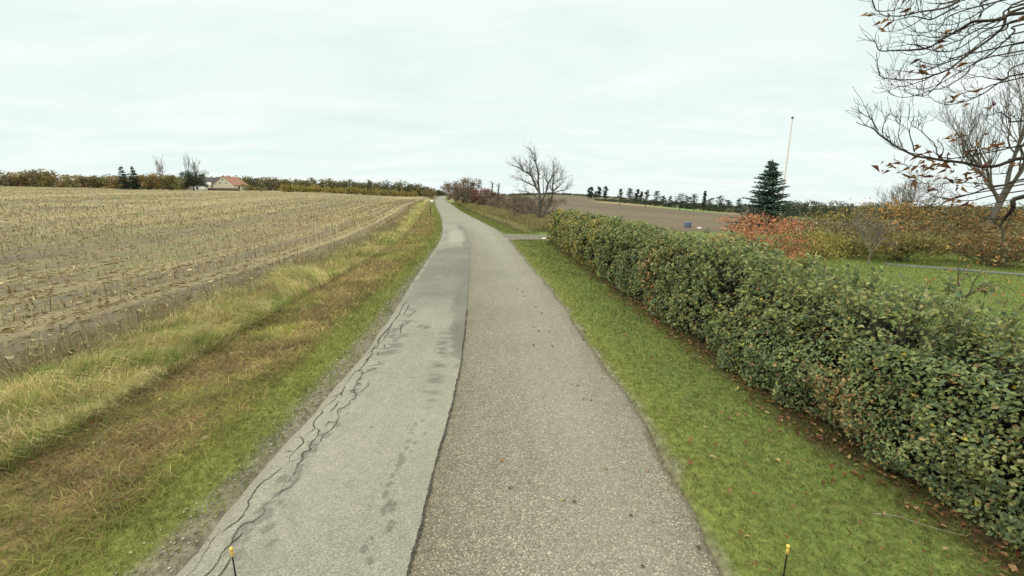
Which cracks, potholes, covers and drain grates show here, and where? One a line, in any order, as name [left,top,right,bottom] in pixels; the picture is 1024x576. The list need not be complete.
crack [186,301,415,576]
